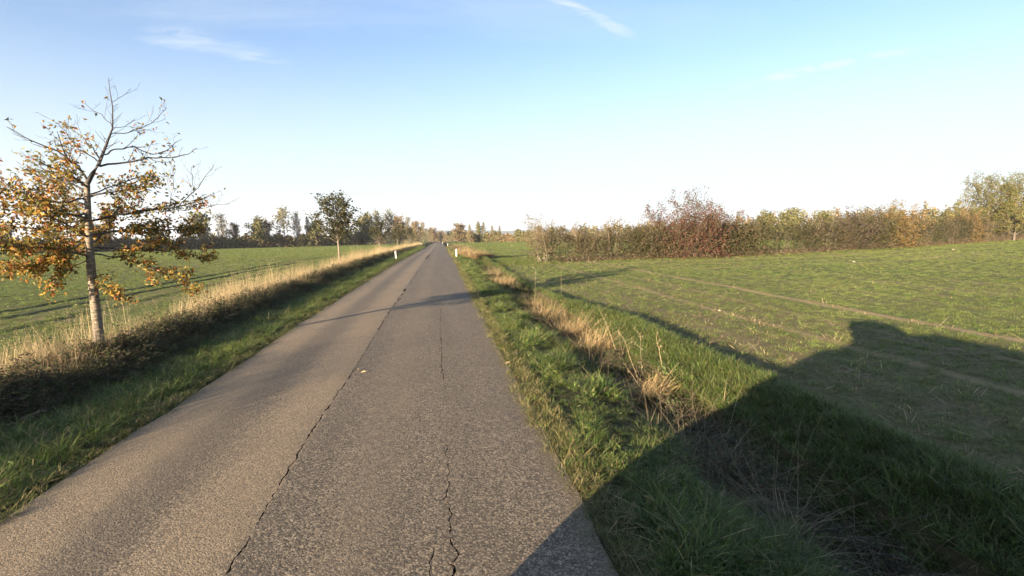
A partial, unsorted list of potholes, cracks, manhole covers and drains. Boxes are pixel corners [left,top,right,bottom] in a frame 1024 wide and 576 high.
crack [429,445,460,576]
crack [224,255,438,576]
